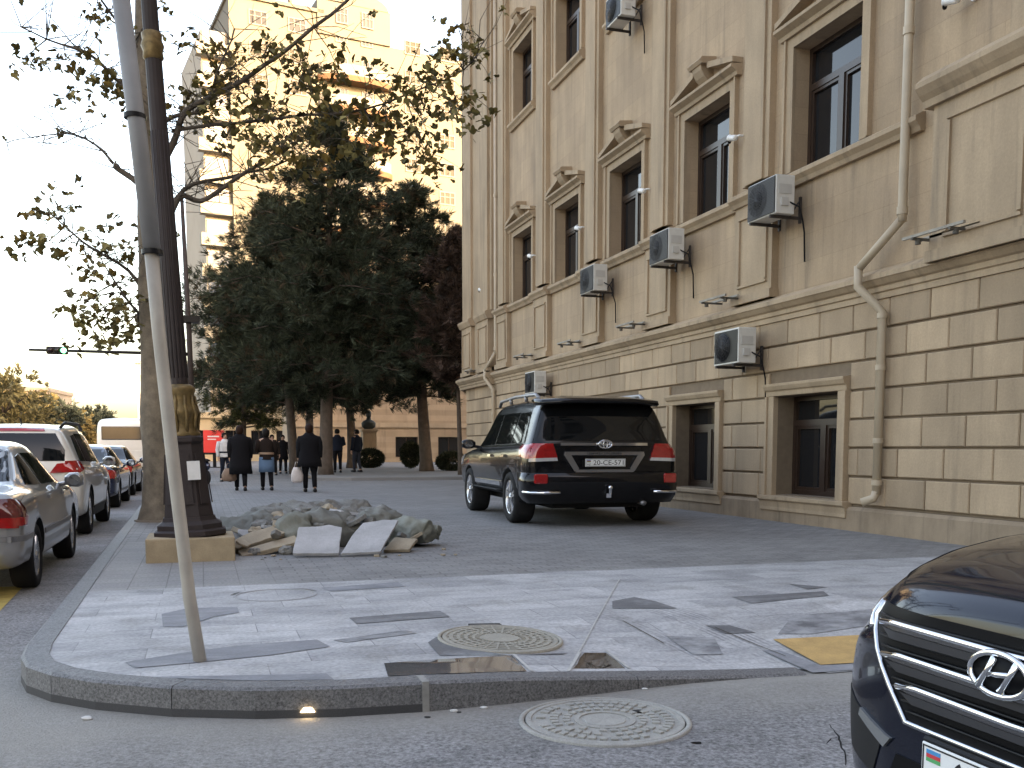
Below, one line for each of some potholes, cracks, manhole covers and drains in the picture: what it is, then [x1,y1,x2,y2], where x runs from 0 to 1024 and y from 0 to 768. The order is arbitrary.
manhole cover [519,697,692,748]
crack [826,724,847,765]
manhole cover [437,623,563,654]
manhole cover [231,588,317,602]
pothole [573,653,624,669]
